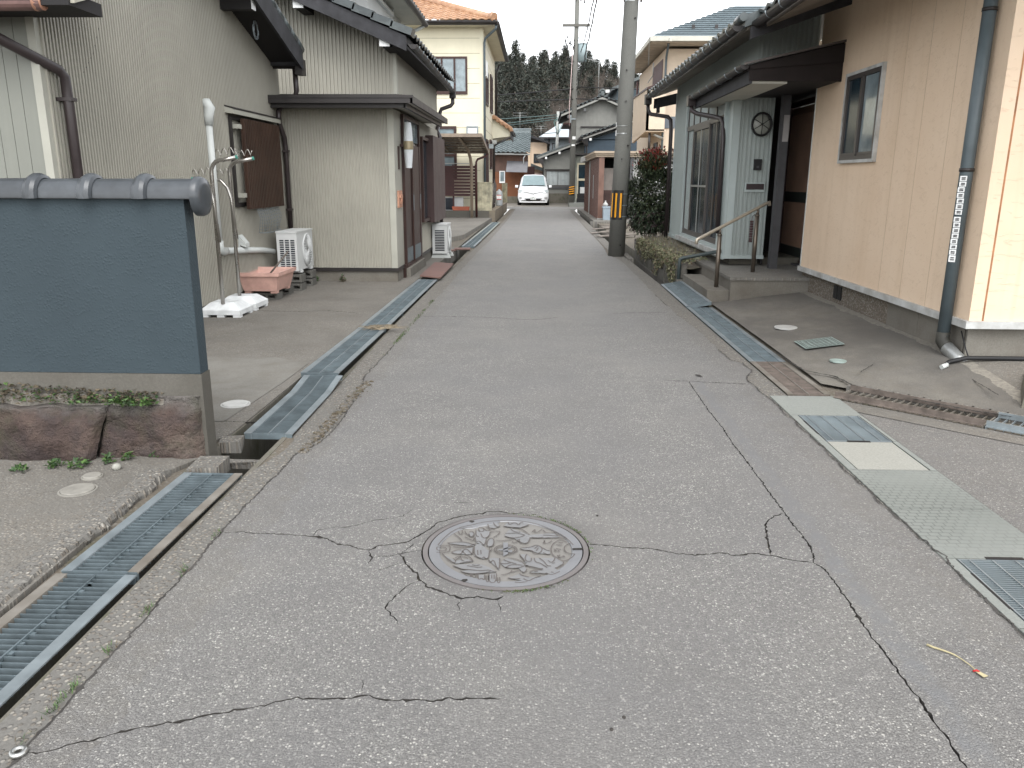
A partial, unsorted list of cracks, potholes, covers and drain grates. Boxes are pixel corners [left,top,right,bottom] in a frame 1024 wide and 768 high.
drain grate [378,288,428,313]
drain grate [723,338,786,363]
crack [587,380,968,768]
drain grate [244,375,343,439]
drain grate [0,573,137,707]
drain grate [300,329,386,377]
crack [225,502,518,624]
drain grate [408,279,438,289]
drain grate [833,385,997,429]
drain grate [61,472,243,581]
drain grate [944,557,1024,630]
manhole cover [422,515,590,591]
